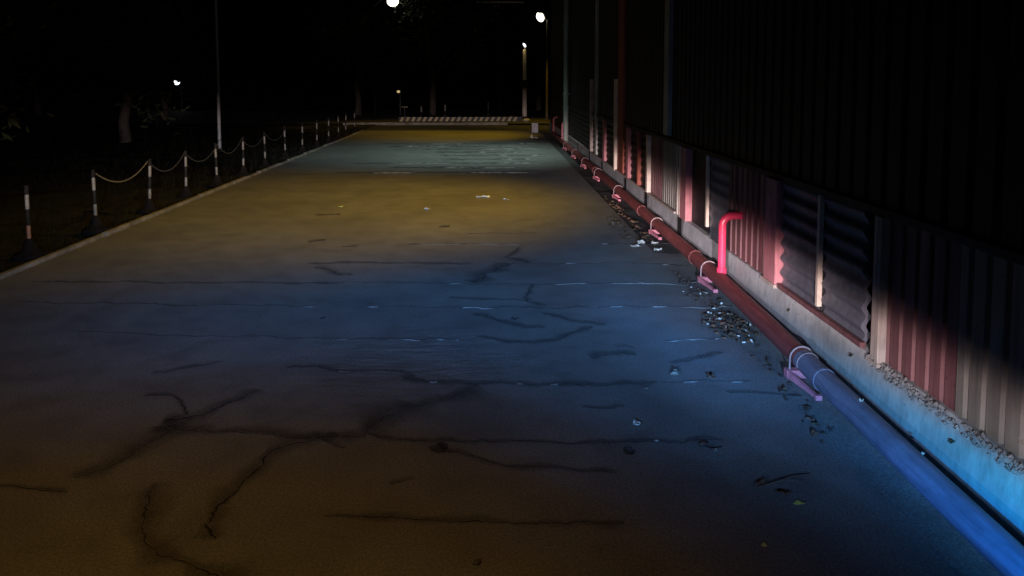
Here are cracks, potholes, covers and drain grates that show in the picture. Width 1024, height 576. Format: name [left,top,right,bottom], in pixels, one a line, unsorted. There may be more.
crack [0,366,724,540]
pothole [429,442,448,453]
crack [141,484,224,576]
